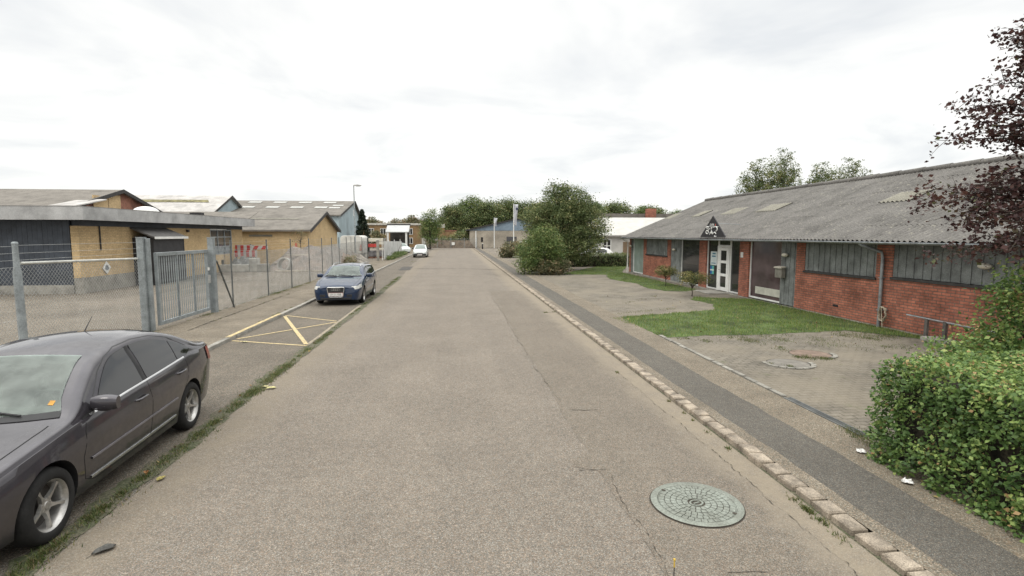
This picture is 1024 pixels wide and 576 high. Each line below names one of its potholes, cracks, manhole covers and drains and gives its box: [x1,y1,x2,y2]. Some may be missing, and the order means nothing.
manhole cover [649,482,746,529]
manhole cover [788,350,838,359]
crack [594,360,856,574]
manhole cover [762,359,817,370]
